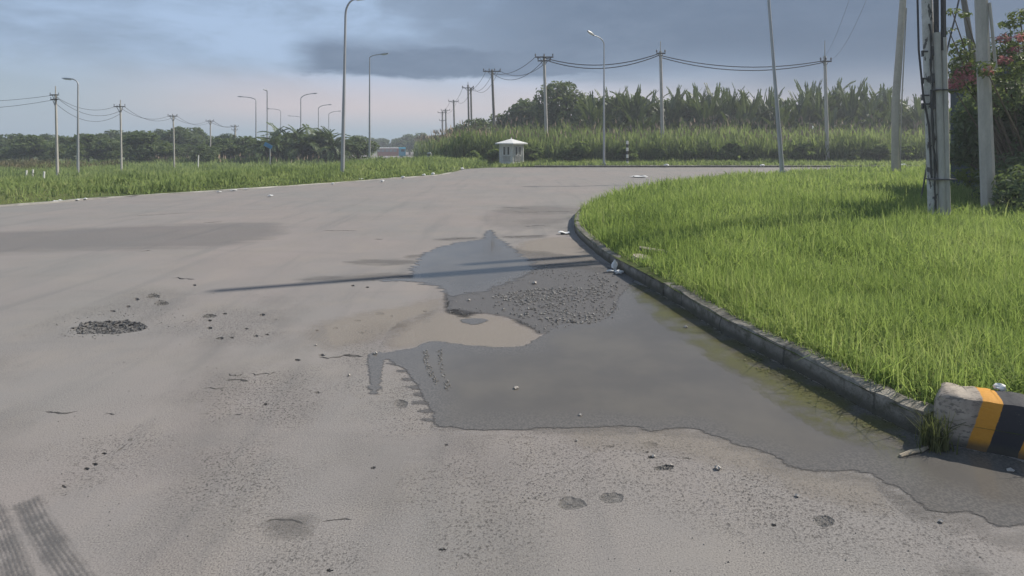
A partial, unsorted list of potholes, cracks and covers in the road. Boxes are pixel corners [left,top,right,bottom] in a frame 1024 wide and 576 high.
pothole [813,515,835,527]
pothole [559,496,587,510]
pothole [71,319,148,334]
pothole [599,492,624,503]
